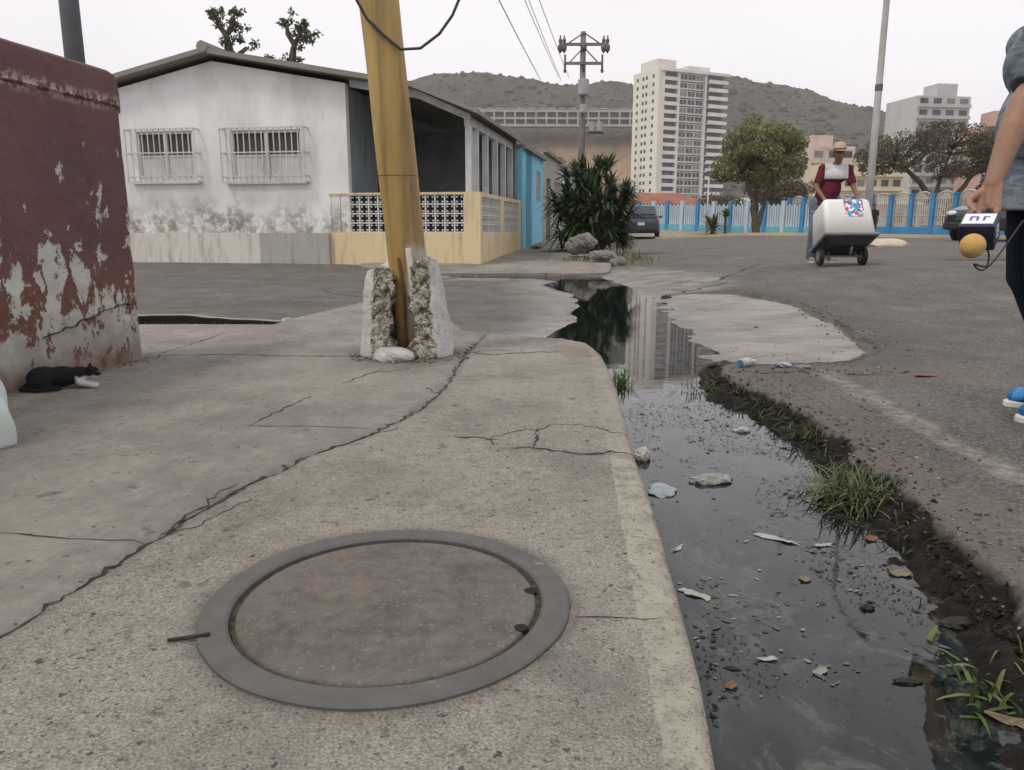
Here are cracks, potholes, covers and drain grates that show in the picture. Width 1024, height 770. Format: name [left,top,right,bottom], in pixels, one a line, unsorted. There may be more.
crack [668,264,759,296]
manhole cover [196,529,570,712]
crack [491,424,634,457]
crack [0,335,486,637]
